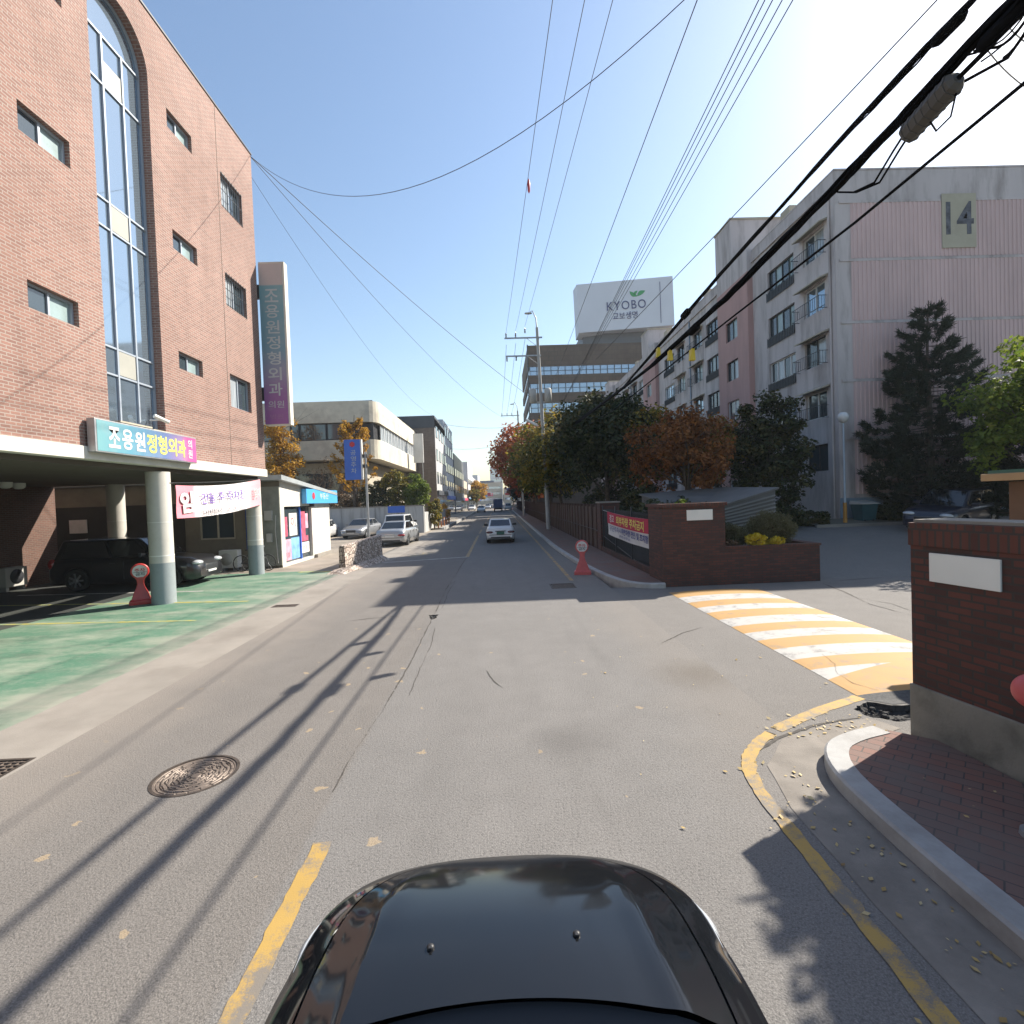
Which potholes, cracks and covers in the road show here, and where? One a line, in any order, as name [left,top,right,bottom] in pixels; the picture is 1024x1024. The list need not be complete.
manhole cover [148,755,240,798]
crack [825,576,911,615]
pothole [854,702,910,722]
crack [332,559,466,792]
drain grate [0,757,37,778]
